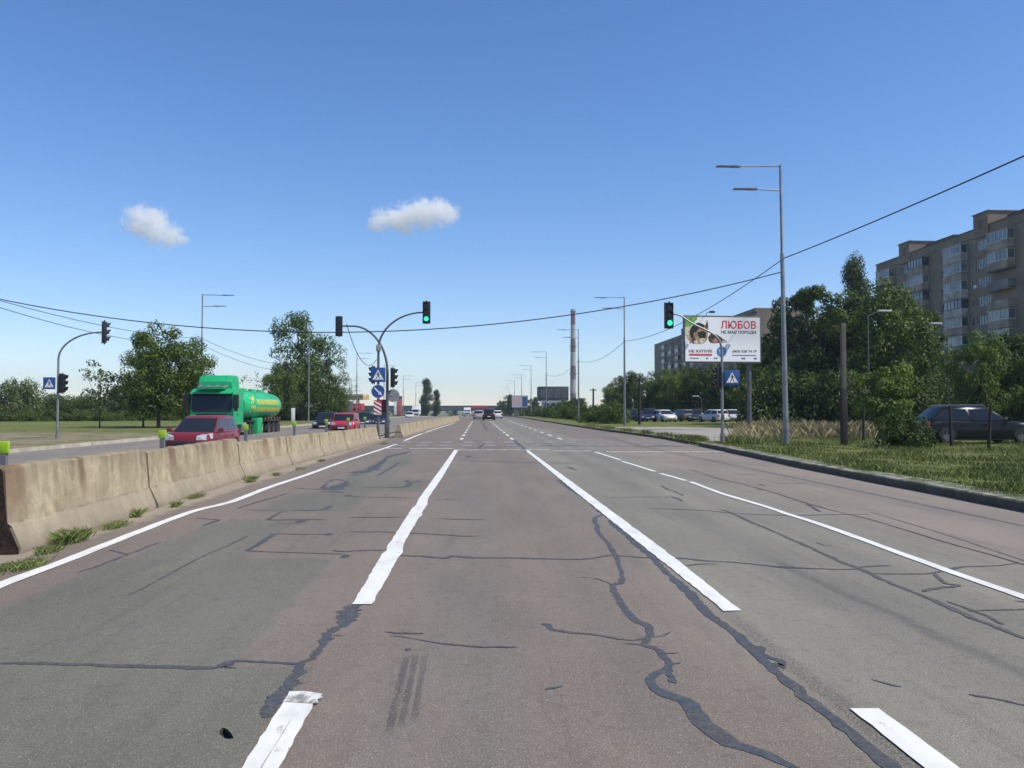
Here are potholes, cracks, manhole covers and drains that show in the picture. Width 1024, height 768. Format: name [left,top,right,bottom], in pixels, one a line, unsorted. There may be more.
pothole [219,727,233,739]
crack [385,631,516,650]
crack [333,549,891,570]
